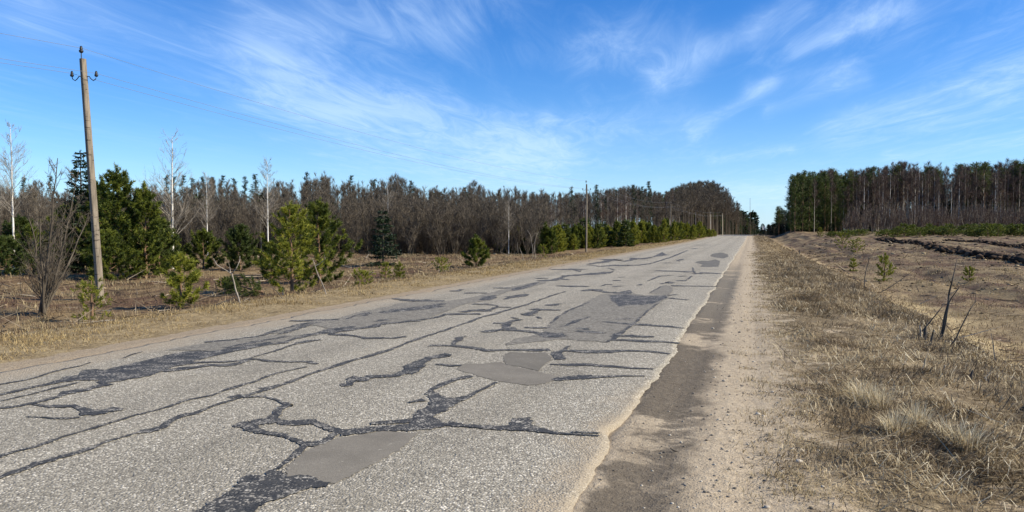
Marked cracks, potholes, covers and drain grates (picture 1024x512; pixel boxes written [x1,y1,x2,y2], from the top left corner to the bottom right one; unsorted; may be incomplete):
crack [0,248,721,478]
